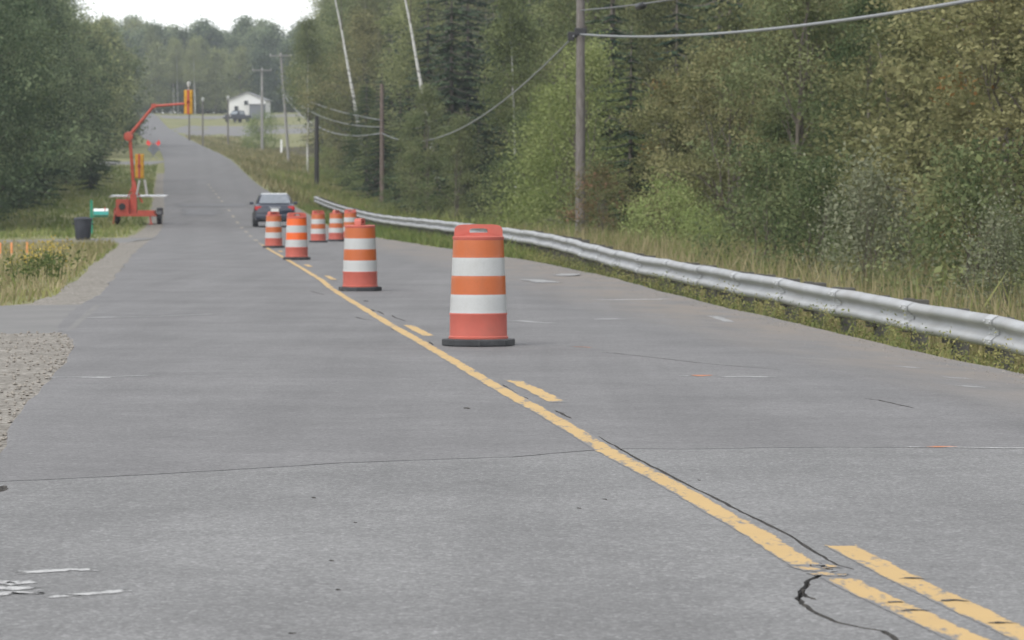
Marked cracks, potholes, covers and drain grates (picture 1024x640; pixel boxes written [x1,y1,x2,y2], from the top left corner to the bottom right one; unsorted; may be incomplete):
crack [600,437,899,640]
